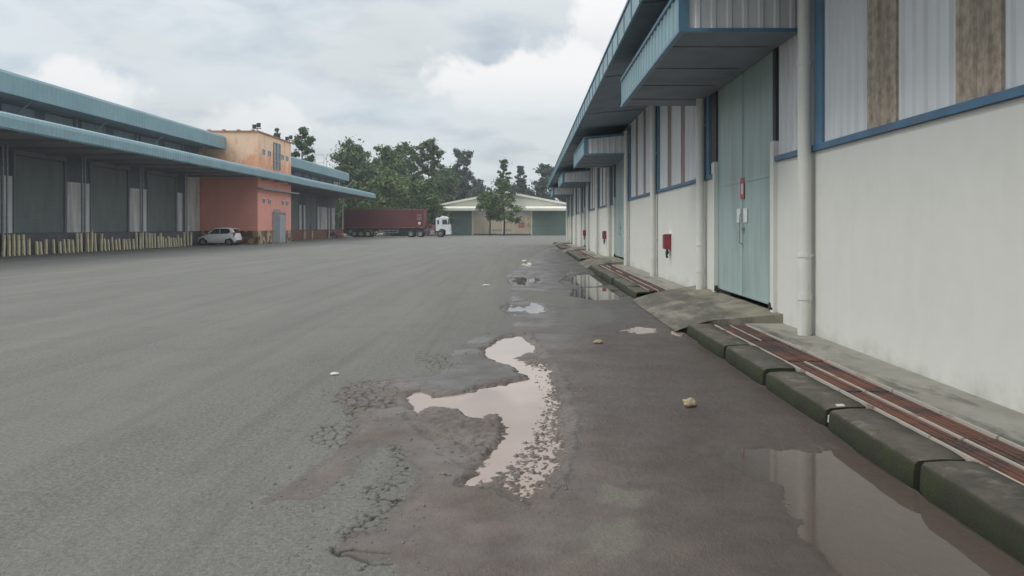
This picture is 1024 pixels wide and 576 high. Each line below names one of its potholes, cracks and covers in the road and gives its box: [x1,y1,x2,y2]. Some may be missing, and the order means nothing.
crack [303,350,458,568]
pothole [506,273,544,287]
pothole [393,333,582,510]
pothole [498,299,548,315]
